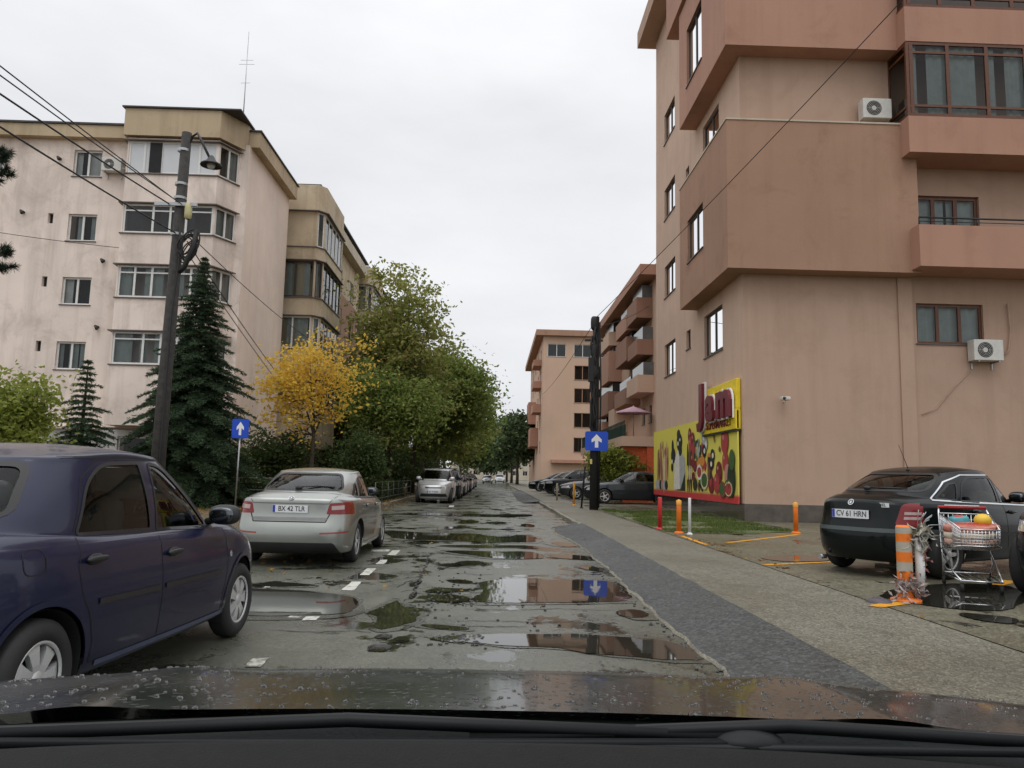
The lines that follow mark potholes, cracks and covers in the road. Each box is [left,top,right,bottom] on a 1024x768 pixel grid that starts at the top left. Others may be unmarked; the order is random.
pothole [367,644,392,652]
